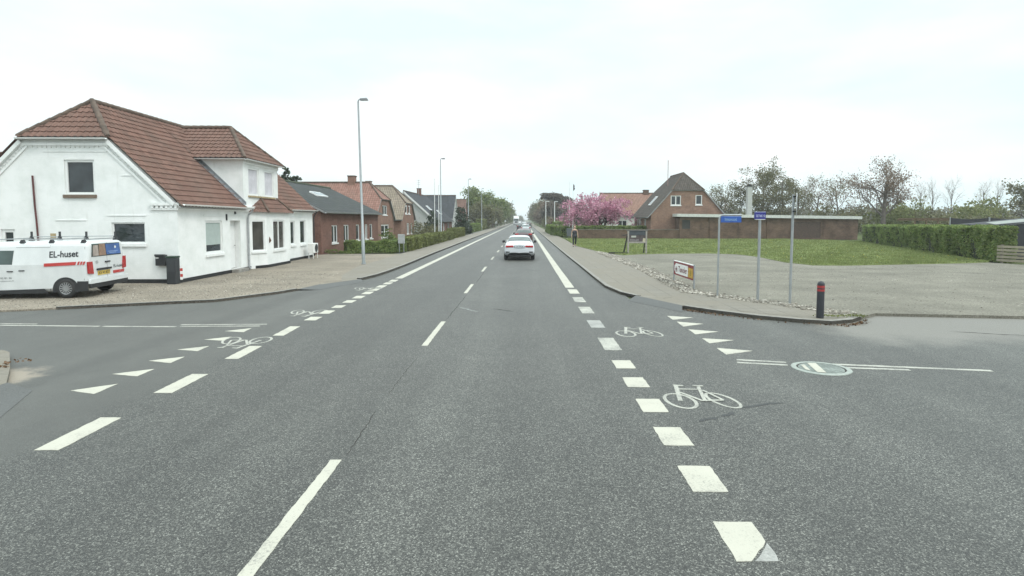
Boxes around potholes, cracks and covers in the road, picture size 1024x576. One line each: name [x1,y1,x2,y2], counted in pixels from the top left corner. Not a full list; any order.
manhole cover [791,361,853,376]
crack [348,274,515,453]
